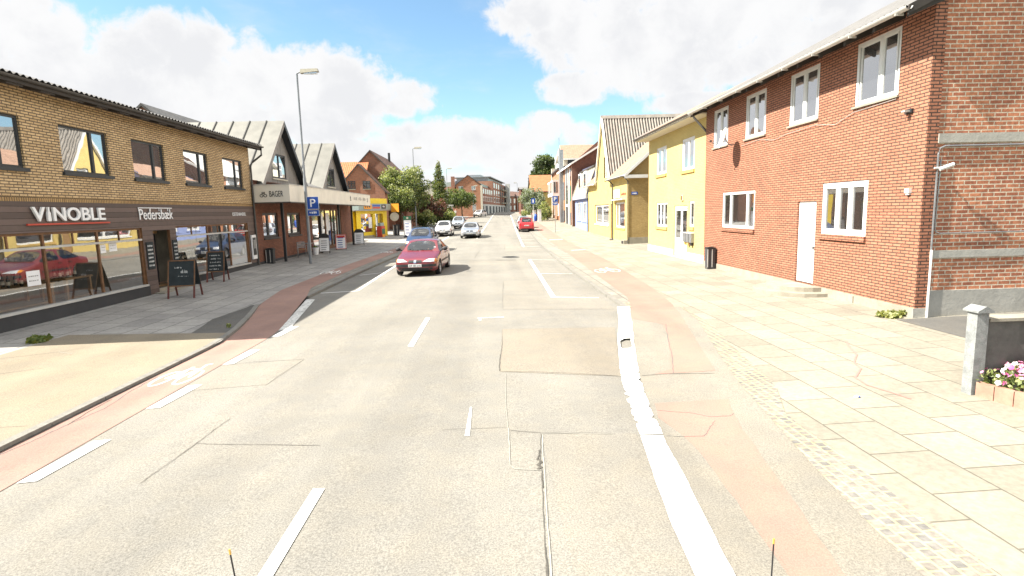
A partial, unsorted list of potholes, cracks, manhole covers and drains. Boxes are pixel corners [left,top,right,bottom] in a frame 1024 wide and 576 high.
crack [445,409,603,576]
crack [642,327,690,376]
